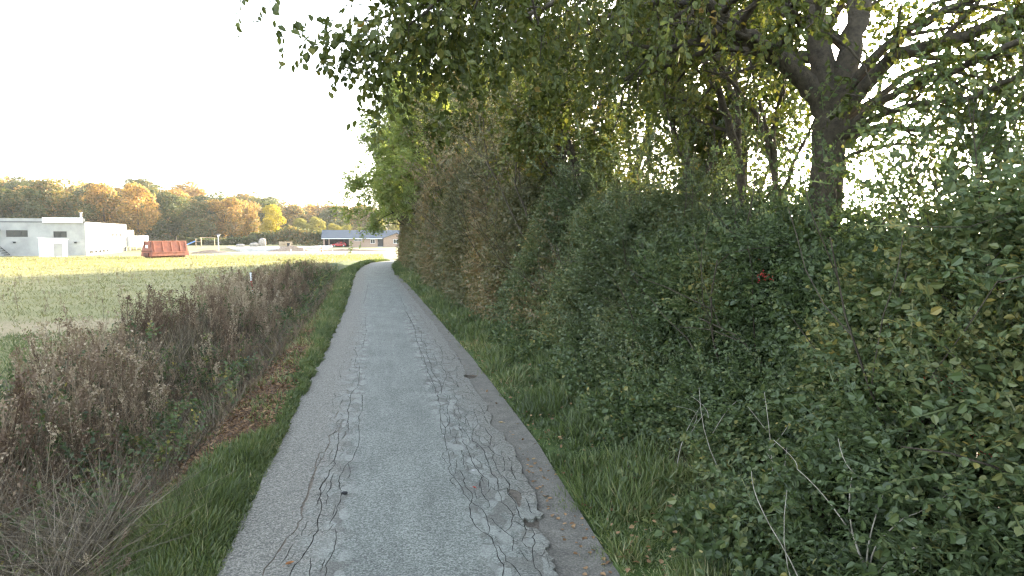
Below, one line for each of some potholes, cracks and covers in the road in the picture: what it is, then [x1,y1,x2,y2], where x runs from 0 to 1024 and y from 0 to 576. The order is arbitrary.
crack [262,318,366,576]
crack [401,300,550,576]
